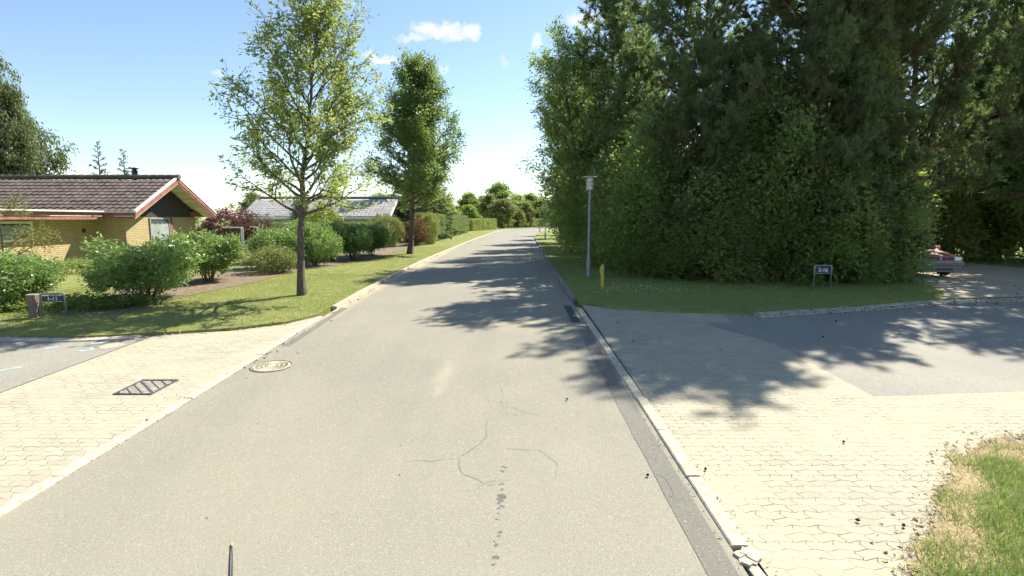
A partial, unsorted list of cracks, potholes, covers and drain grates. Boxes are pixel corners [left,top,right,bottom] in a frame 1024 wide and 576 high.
drain grate [113,379,178,395]
crack [405,424,500,489]
manhole cover [249,360,294,373]
